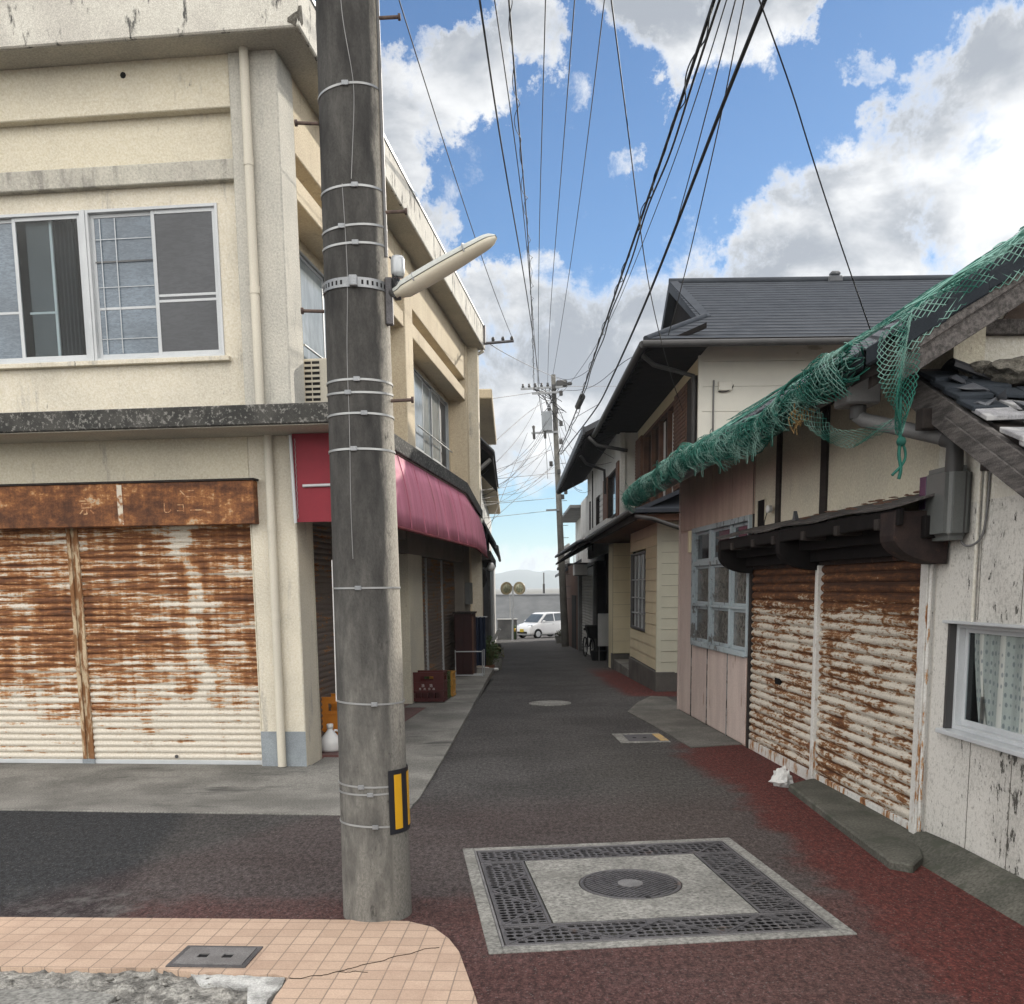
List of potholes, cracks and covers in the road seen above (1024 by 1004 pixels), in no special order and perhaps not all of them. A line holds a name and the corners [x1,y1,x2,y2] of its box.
manhole cover [579,869,682,900]
drain grate [481,861,552,929]
crack [289,947,439,979]
drain grate [500,910,832,946]
utility cover [165,945,263,968]
drain grate [694,852,809,913]
drain grate [477,841,734,866]
